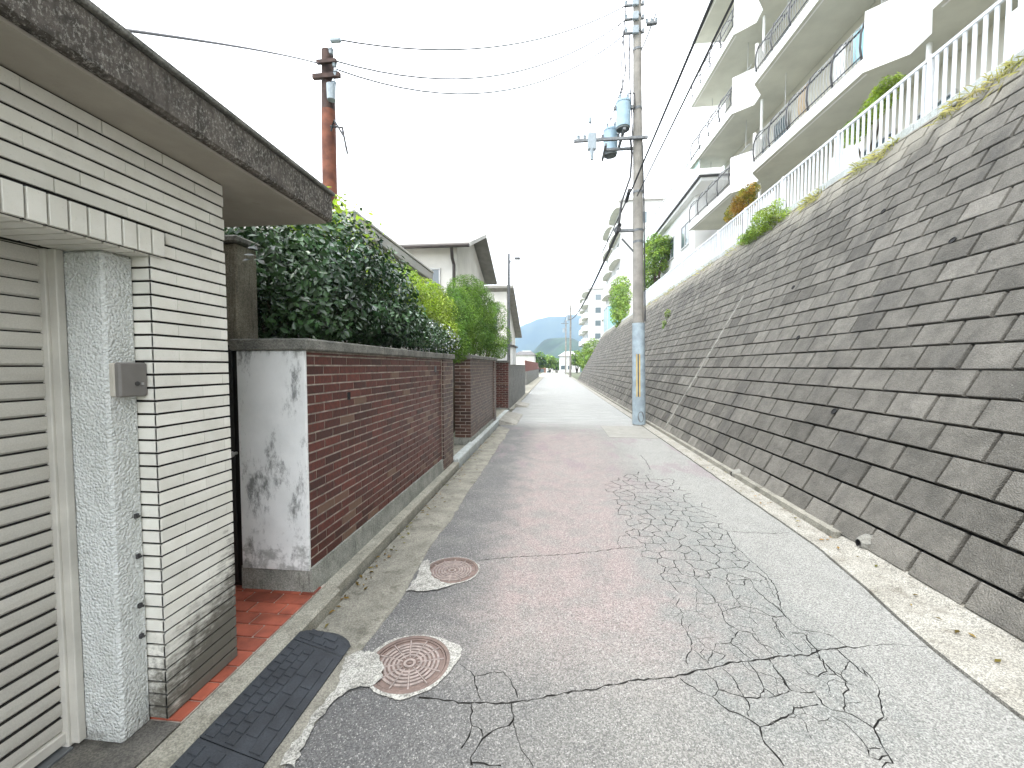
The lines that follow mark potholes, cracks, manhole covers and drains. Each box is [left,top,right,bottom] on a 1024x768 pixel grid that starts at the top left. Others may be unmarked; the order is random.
manhole cover [429,557,480,584]
manhole cover [369,635,462,700]
crack [419,472,924,768]
